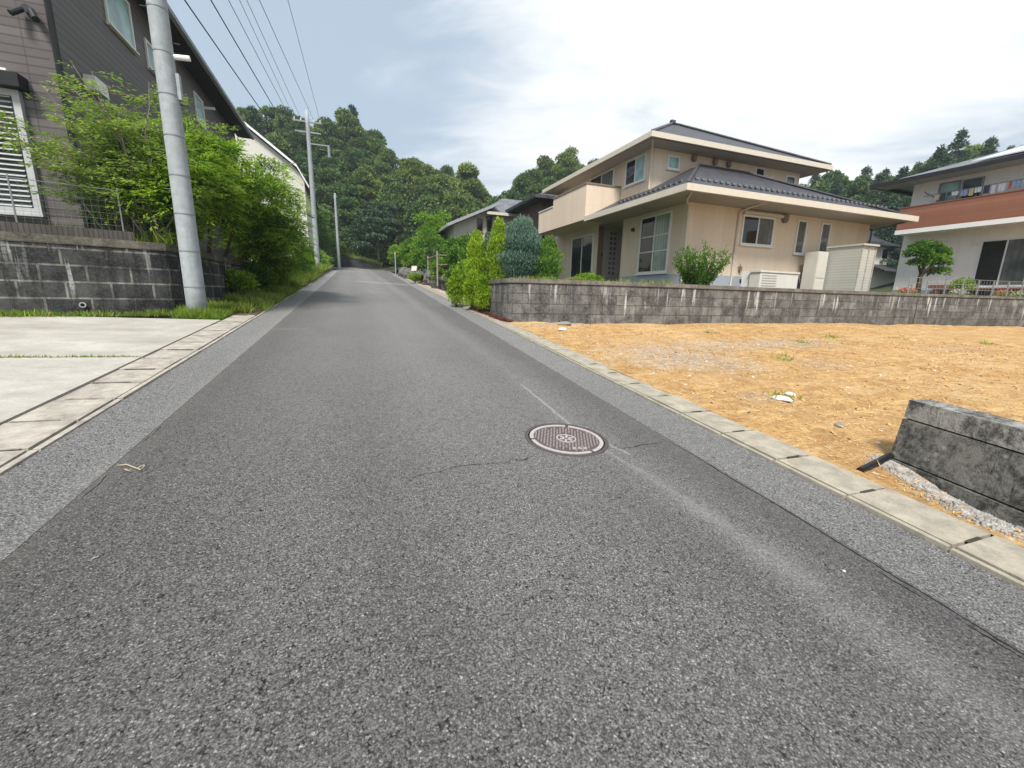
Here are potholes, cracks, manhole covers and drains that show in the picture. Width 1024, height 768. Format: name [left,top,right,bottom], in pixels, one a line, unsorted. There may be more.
crack [402,453,538,479]
manhole cover [525,423,609,457]
